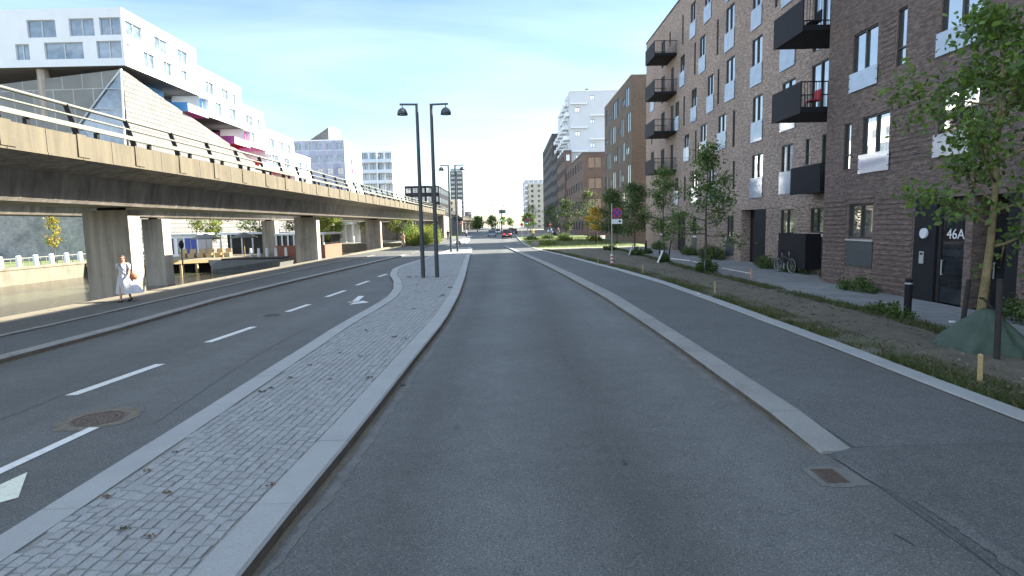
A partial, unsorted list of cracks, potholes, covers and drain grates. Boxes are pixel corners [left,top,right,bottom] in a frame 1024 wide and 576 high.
manhole cover [50,407,144,432]
drain grate [800,466,871,488]
